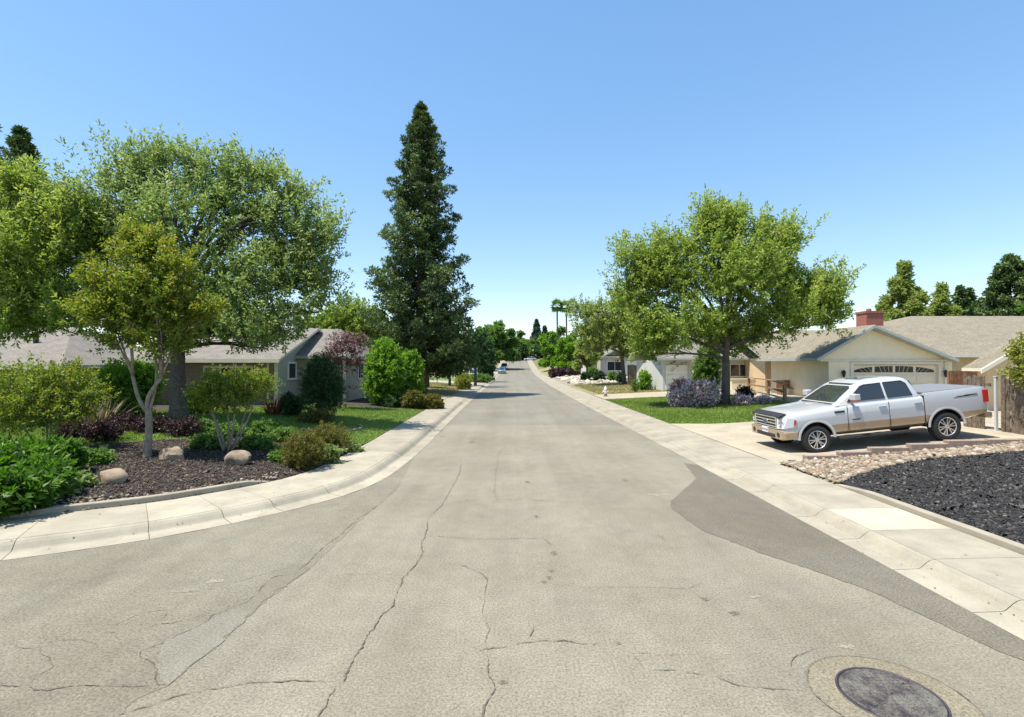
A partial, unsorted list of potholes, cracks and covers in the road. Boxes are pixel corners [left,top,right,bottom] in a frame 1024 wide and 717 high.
manhole cover [805,655,985,717]
crack [5,439,627,717]
